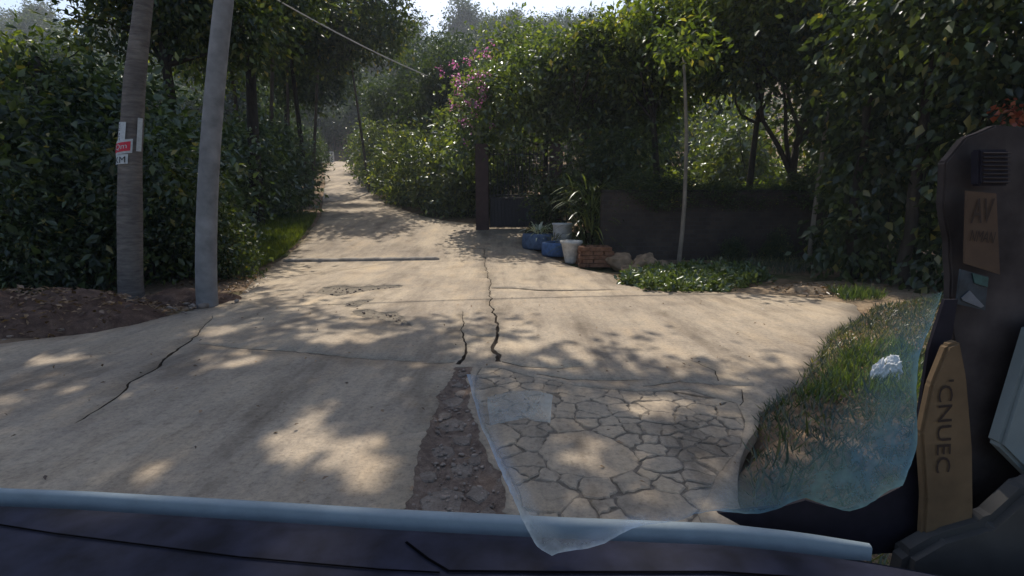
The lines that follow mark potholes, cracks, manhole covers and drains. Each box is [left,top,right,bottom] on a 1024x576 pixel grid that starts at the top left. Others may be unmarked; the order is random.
pothole [404,367,506,514]
crack [76,250,745,523]
pothole [352,309,411,326]
pothole [317,285,403,296]
